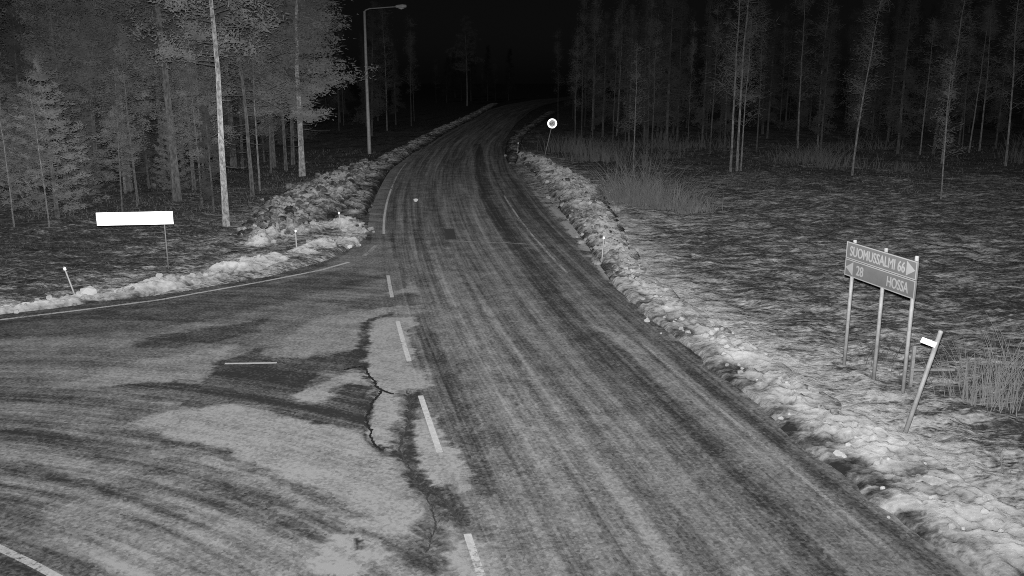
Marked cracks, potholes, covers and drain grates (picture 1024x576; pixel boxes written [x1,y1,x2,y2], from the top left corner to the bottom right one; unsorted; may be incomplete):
crack [344,366,462,554]
